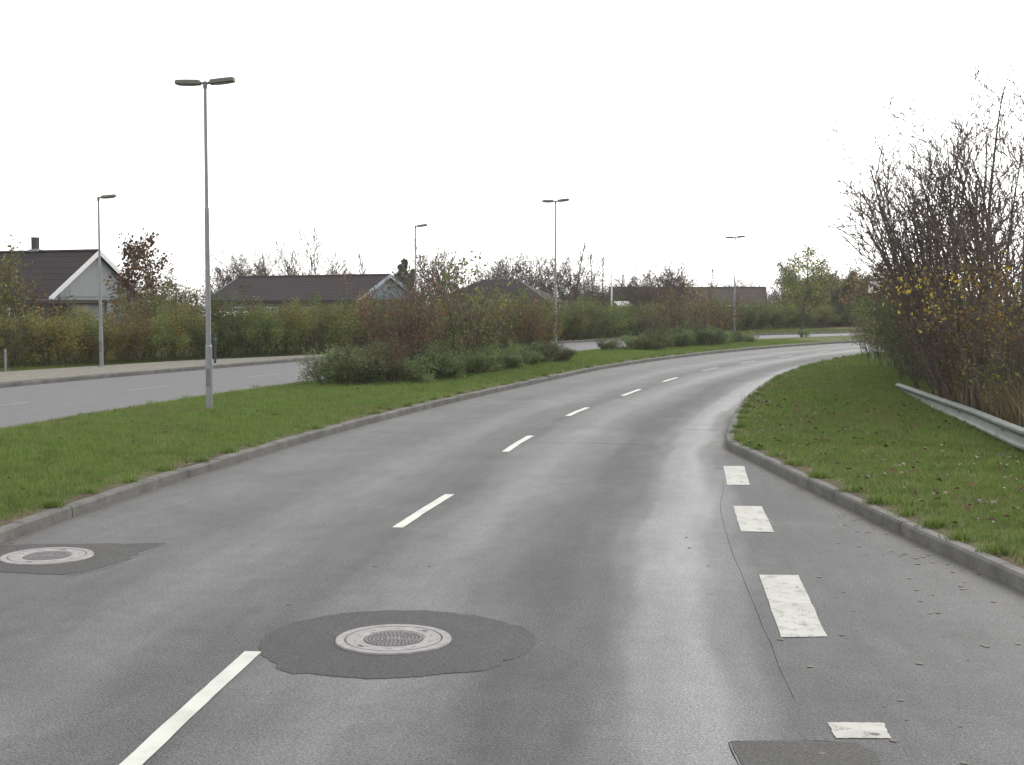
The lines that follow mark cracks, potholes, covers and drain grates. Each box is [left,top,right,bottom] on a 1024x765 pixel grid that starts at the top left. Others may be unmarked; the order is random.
crack [720,481,795,701]
manhole cover [0,547,94,565]
manhole cover [335,624,452,655]
